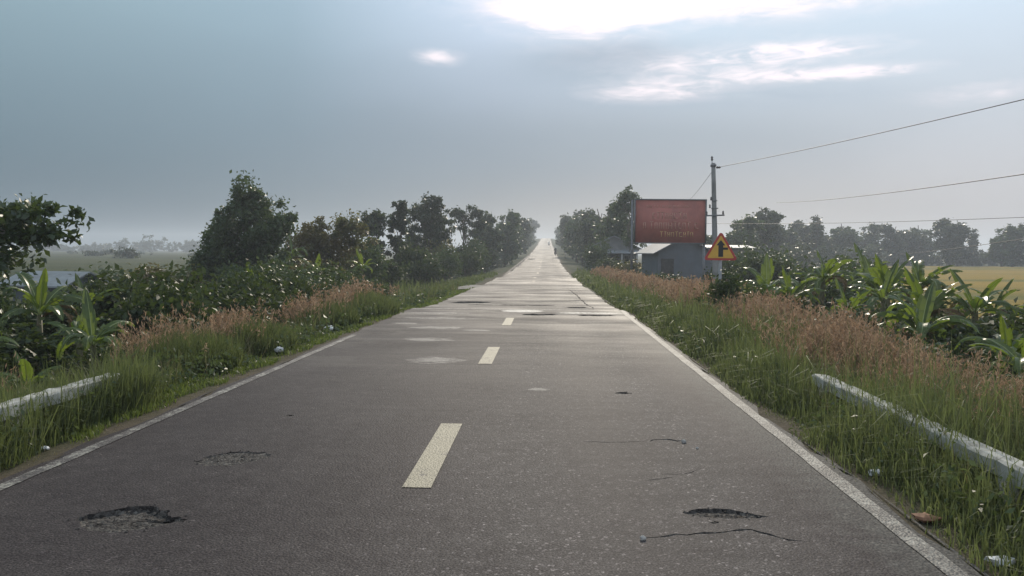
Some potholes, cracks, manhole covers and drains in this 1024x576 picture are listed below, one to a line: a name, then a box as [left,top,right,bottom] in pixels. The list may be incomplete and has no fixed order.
pothole [67,503,191,533]
crack [648,529,798,541]
pothole [194,450,271,466]
pothole [683,507,767,520]
